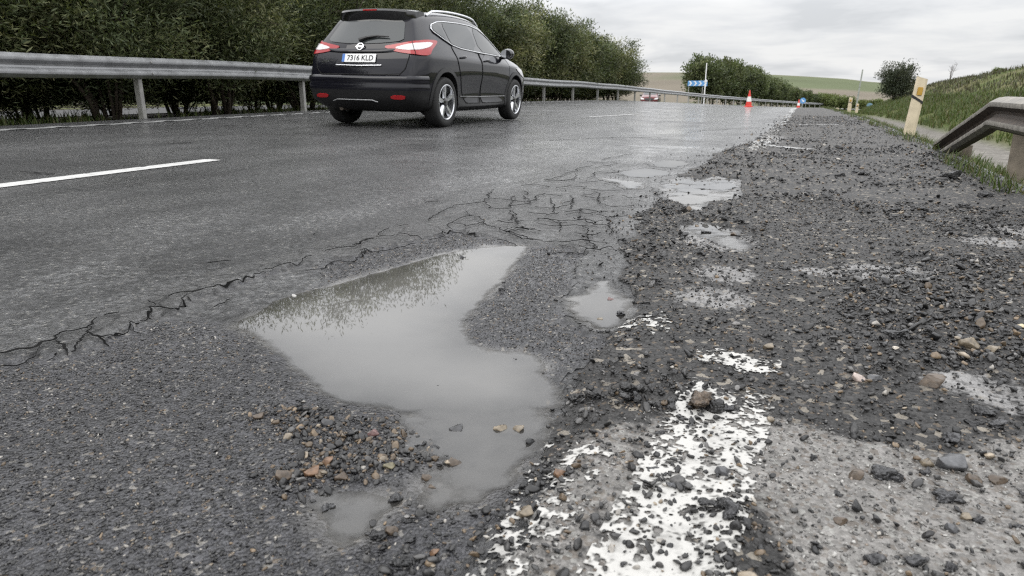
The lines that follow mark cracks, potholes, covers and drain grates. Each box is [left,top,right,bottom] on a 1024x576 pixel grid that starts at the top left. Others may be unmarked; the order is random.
pothole [595,177,648,189]
pothole [679,221,754,251]
pothole [650,176,743,210]
pothole [561,278,642,332]
pothole [0,229,612,576]
crack [0,137,650,366]
pothole [613,167,679,178]
